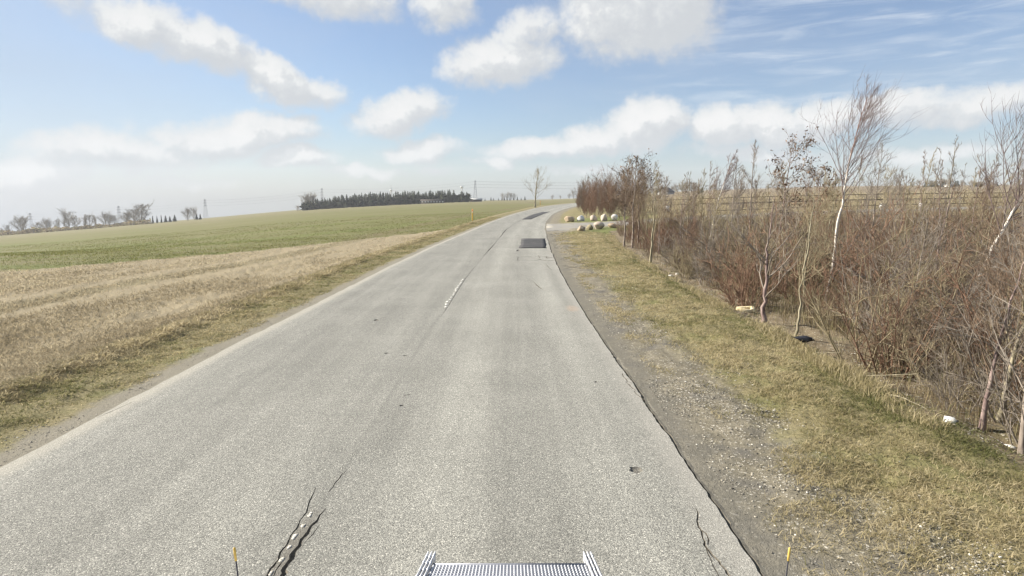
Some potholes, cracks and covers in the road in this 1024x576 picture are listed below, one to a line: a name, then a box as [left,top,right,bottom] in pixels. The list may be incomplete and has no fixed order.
crack [267,471,346,576]
